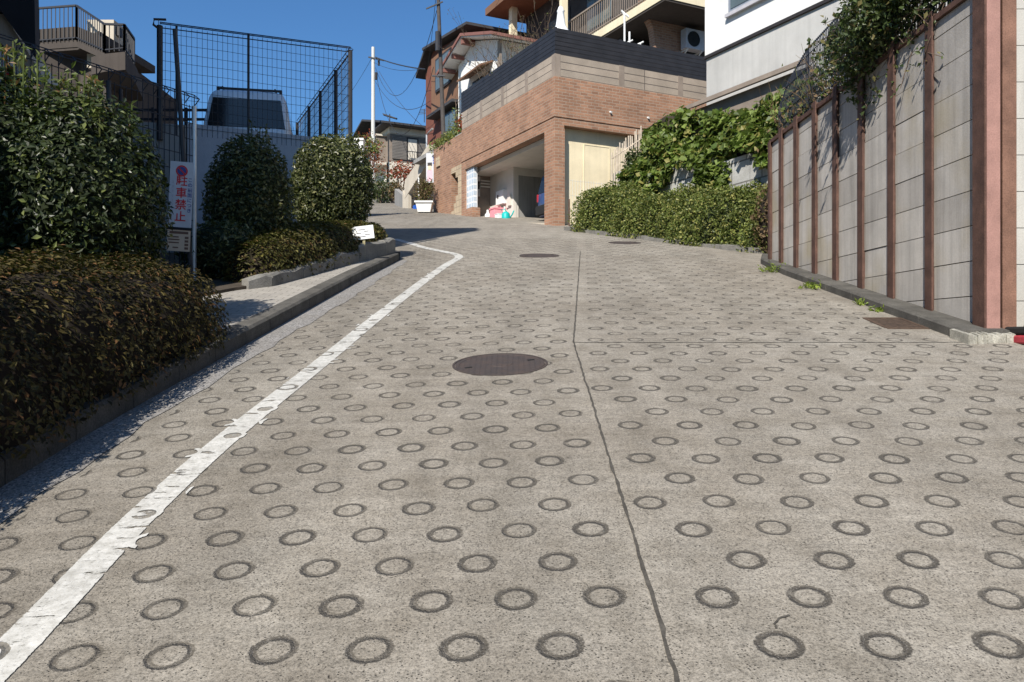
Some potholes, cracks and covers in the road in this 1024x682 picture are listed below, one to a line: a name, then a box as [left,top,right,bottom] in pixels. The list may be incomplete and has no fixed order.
manhole cover [452,353,548,376]
